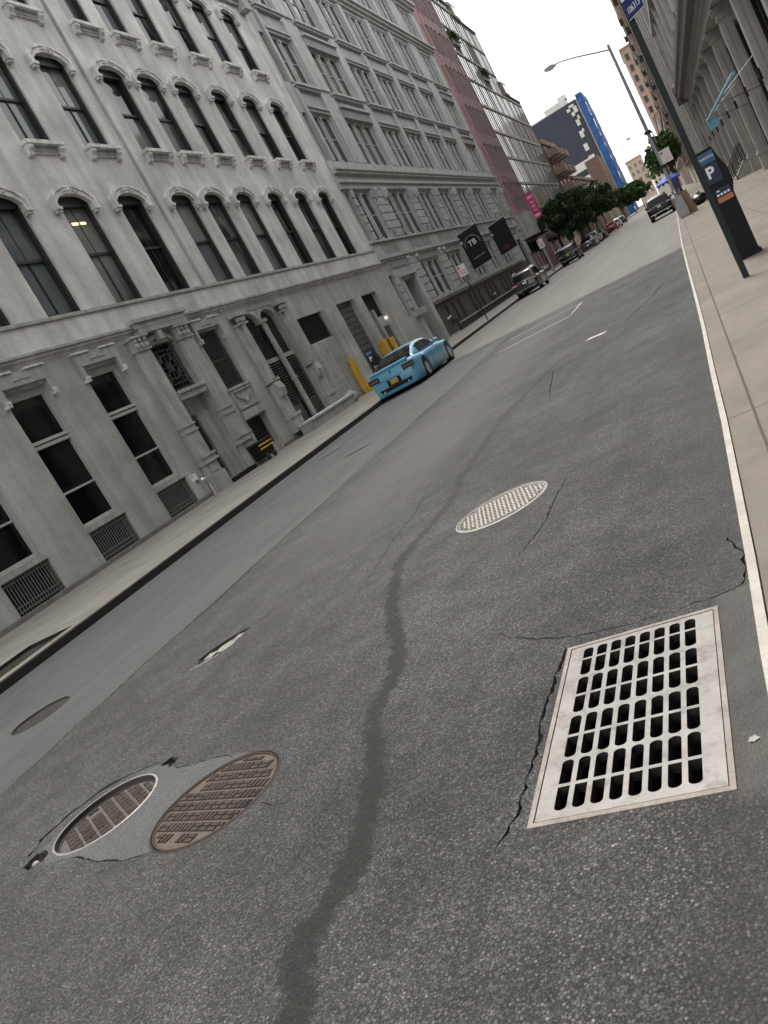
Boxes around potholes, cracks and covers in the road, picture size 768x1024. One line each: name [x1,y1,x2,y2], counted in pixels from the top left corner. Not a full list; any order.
pothole [192,627,250,669]
crack [495,539,747,849]
manhole cover [149,750,281,854]
manhole cover [456,481,548,533]
manhole cover [52,774,158,856]
crack [518,479,566,556]
manhole cover [10,696,71,736]
drain grate [527,605,738,830]
